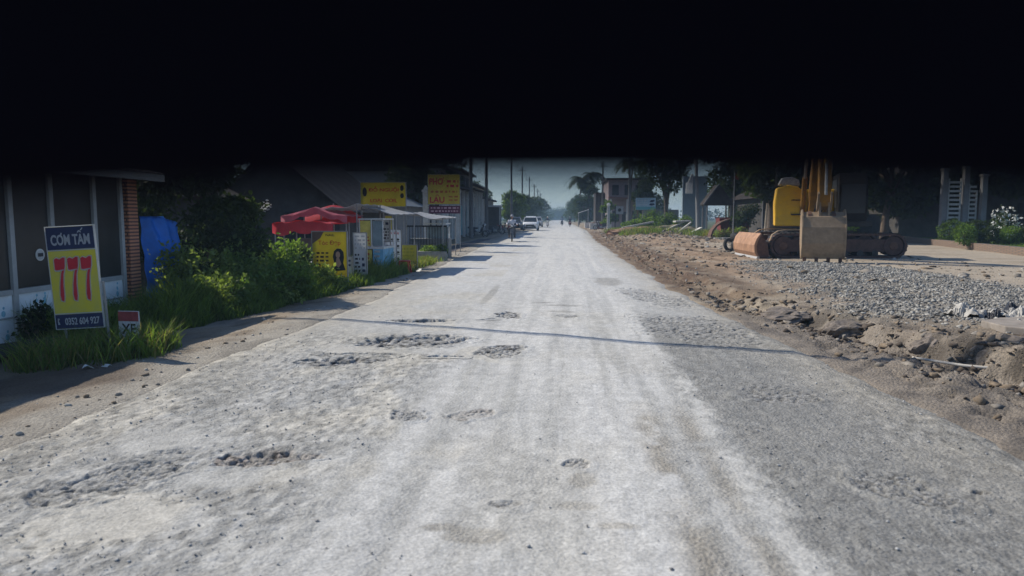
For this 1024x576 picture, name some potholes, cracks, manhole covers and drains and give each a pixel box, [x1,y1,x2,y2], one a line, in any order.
pothole [332,333,491,351]
pothole [173,447,341,472]
pothole [382,407,433,425]
pothole [551,455,600,473]
pothole [465,342,539,361]
pothole [471,497,537,514]
pothole [488,310,531,322]
pothole [257,354,397,370]
pothole [430,406,511,425]
